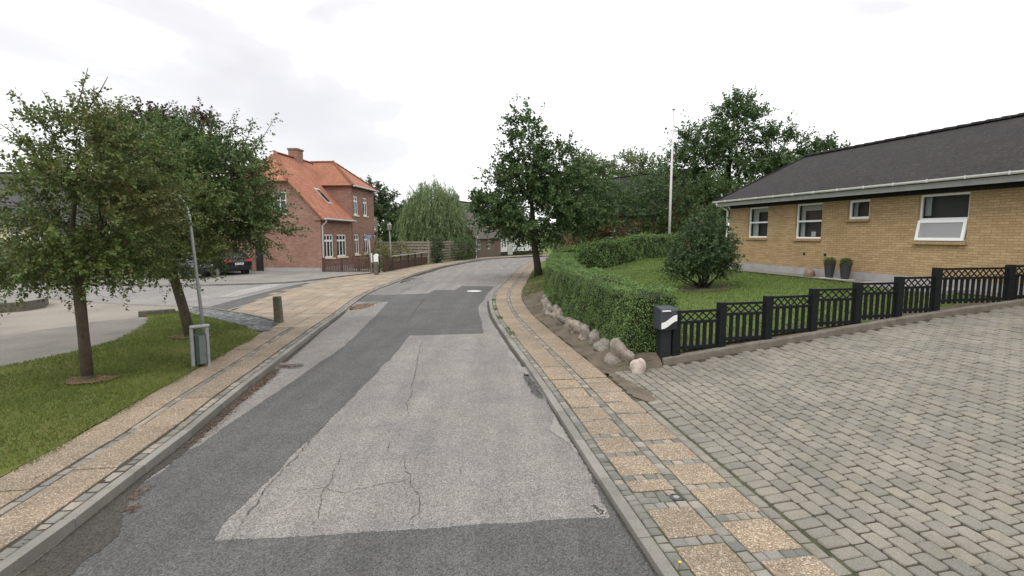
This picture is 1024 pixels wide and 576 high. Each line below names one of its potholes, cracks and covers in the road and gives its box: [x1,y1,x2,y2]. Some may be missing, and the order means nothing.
crack [300,443,420,525]
crack [229,426,324,543]
pothole [523,370,544,399]
